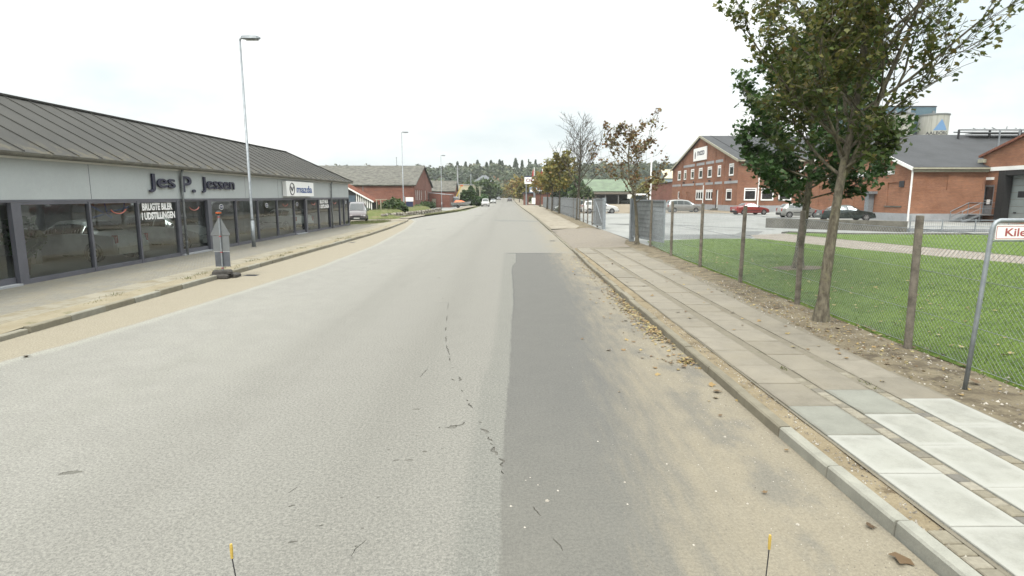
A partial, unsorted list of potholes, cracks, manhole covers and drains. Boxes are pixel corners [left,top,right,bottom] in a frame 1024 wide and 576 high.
crack [444,302,506,474]
